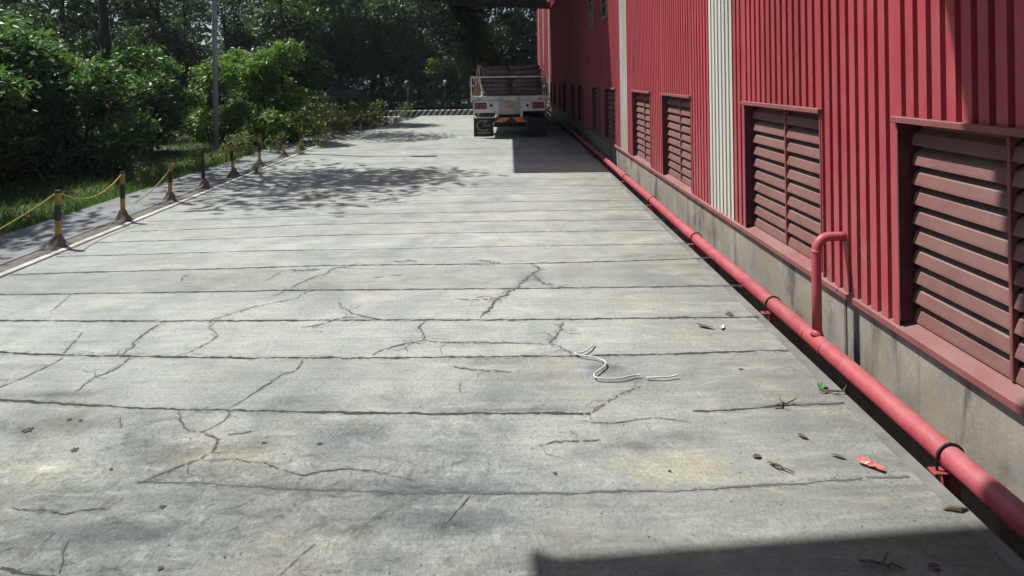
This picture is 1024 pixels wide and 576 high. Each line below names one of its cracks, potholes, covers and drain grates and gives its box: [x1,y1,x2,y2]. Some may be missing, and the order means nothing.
crack [463,264,565,318]
crack [11,495,108,531]
crack [59,542,97,572]
crack [531,382,687,457]
crack [184,263,356,354]
crack [372,322,579,393]
crack [0,331,83,387]
crack [76,321,166,391]
crack [142,359,412,489]
